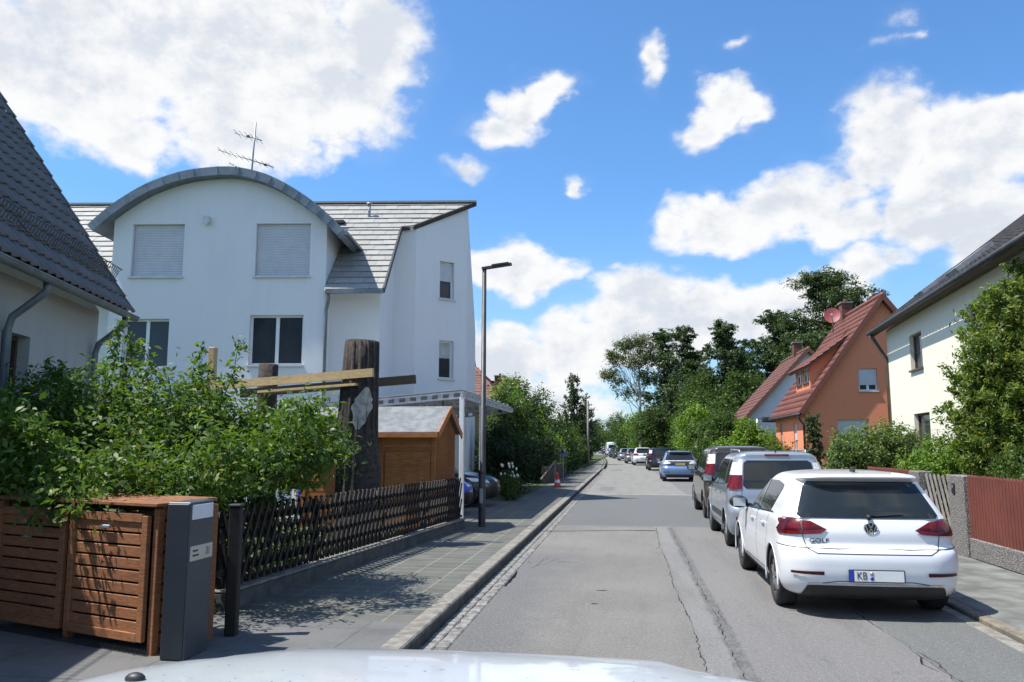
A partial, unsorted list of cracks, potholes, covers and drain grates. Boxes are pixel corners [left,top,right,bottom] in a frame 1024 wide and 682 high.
crack [854,611,964,682]
crack [656,527,746,679]
